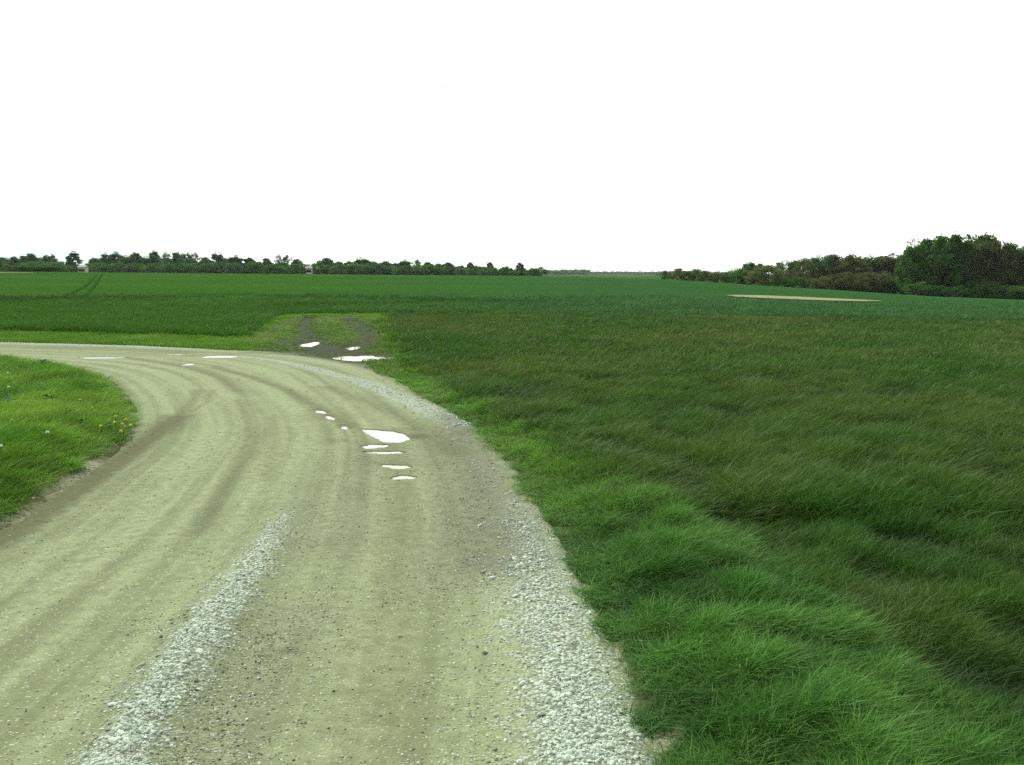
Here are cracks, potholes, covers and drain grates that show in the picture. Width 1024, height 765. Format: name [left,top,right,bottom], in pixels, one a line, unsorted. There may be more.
pothole [361,429,411,443]
